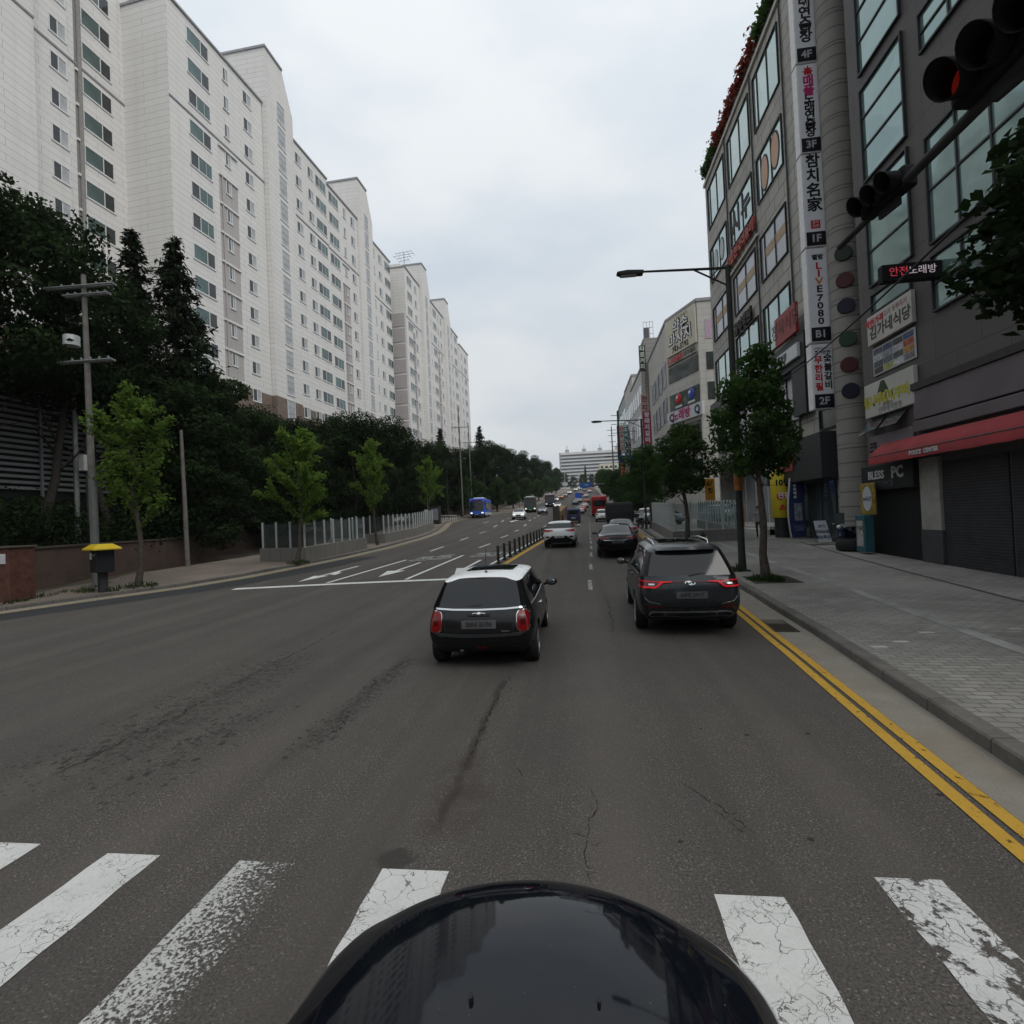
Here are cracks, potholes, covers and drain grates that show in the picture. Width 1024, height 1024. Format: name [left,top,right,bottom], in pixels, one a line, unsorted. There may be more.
crack [570,788,601,879]
drain grate [761,620,800,632]
crack [682,783,755,834]
